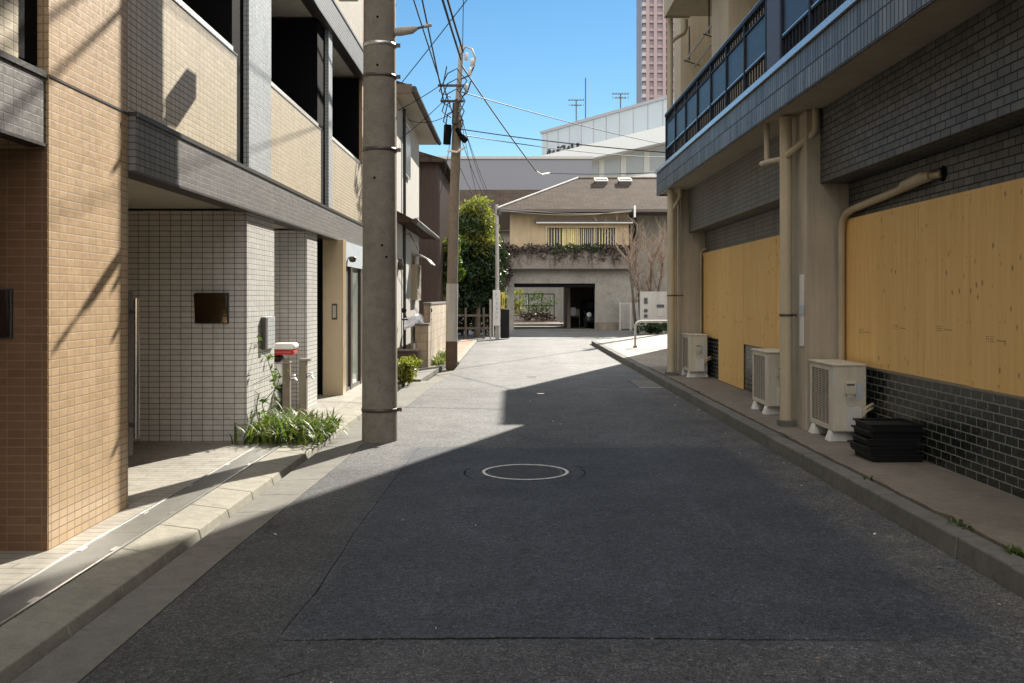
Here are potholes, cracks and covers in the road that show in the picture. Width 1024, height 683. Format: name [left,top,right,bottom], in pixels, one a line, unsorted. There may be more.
manhole cover [479,464,572,481]
